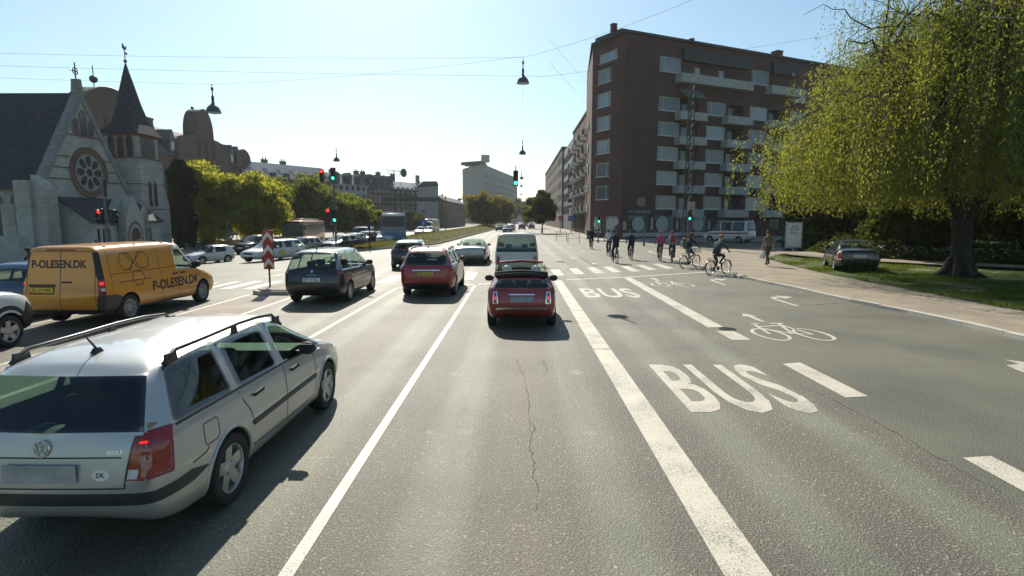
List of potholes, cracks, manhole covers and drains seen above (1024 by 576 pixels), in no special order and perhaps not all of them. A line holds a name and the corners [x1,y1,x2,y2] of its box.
crack [517,361,542,511]
